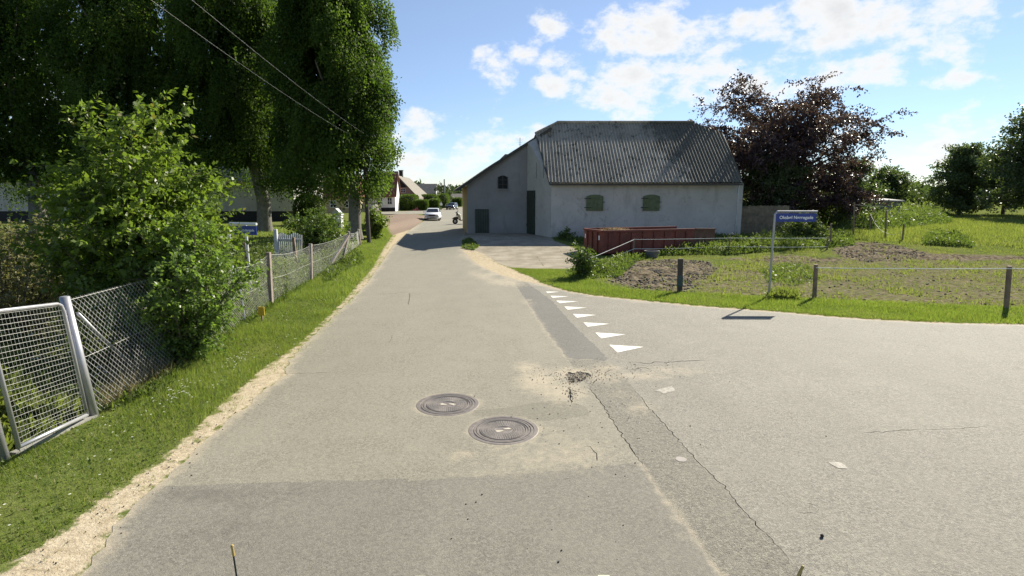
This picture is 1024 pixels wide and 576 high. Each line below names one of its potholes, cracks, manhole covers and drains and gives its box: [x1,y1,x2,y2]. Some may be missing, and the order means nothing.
manhole cover [468,416,539,445]
manhole cover [416,393,479,416]
pothole [565,372,592,385]
